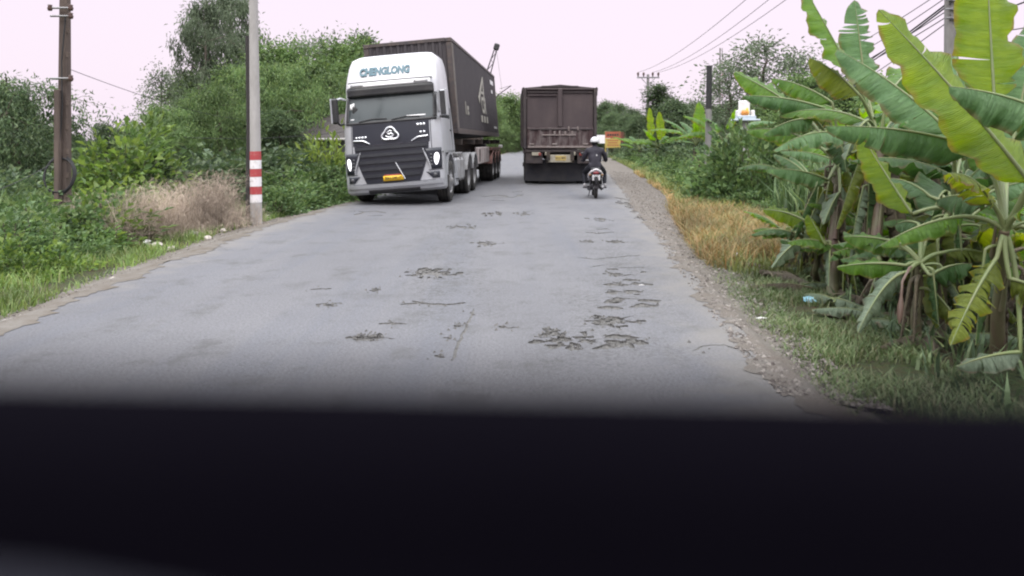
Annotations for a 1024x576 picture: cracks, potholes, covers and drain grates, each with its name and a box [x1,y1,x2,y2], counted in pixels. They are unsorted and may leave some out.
crack [377,301,468,328]
pothole [345,329,395,342]
crack [585,255,661,311]
pothole [399,267,464,279]
